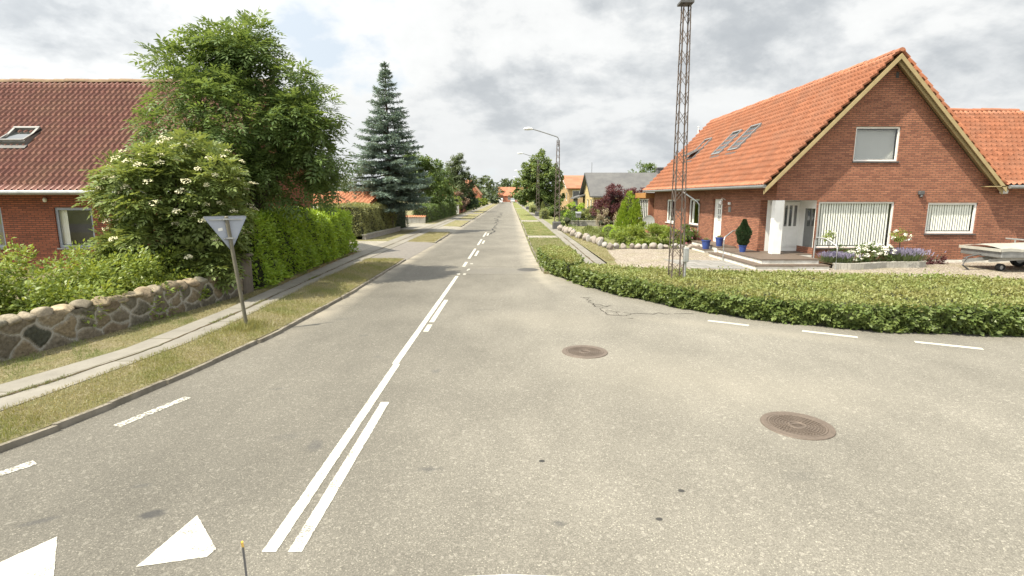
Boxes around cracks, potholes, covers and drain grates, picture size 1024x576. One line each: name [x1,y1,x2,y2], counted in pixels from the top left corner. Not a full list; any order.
manhole cover [760,411,836,440]
crack [583,297,692,319]
manhole cover [562,345,608,359]
